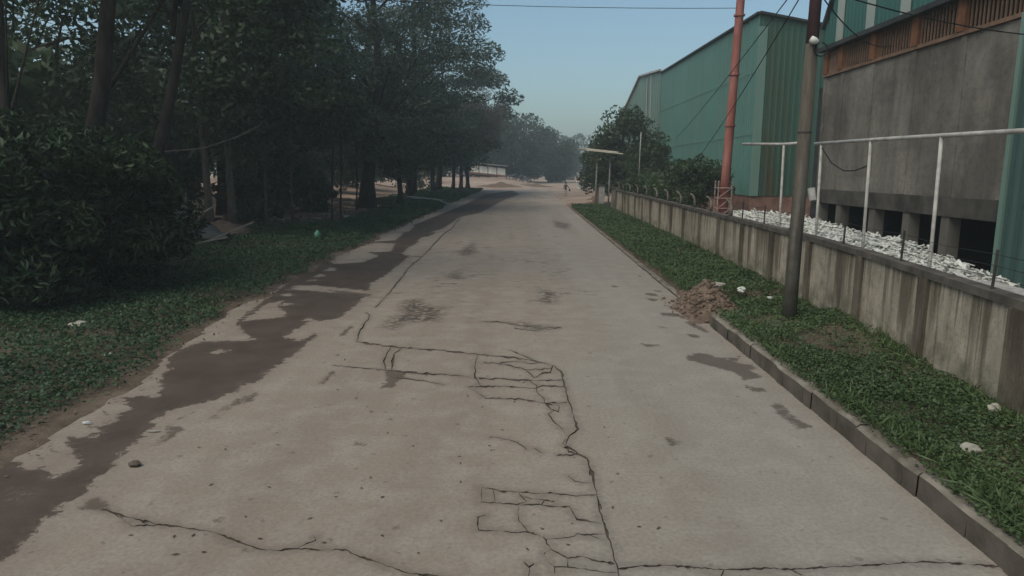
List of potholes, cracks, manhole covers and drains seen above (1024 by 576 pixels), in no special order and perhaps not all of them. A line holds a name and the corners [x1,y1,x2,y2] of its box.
crack [370,219,460,308]
crack [334,312,998,576]
crack [101,509,438,576]
